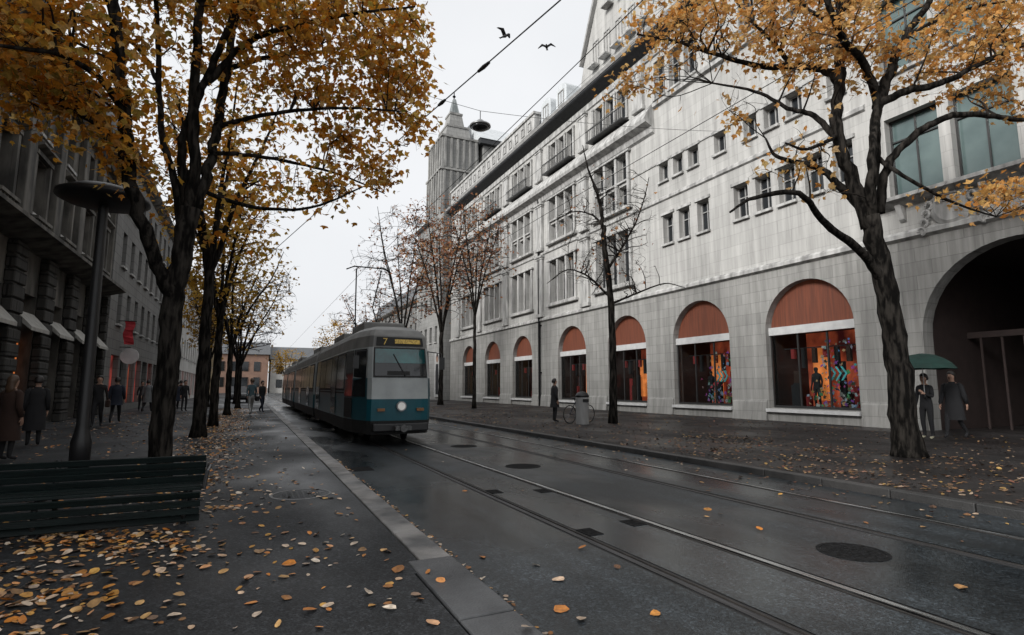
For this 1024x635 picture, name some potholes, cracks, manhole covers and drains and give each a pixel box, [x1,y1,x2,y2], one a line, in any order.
manhole cover [816,542,892,562]
manhole cover [269,489,332,500]
drain grate [576,528,604,537]
